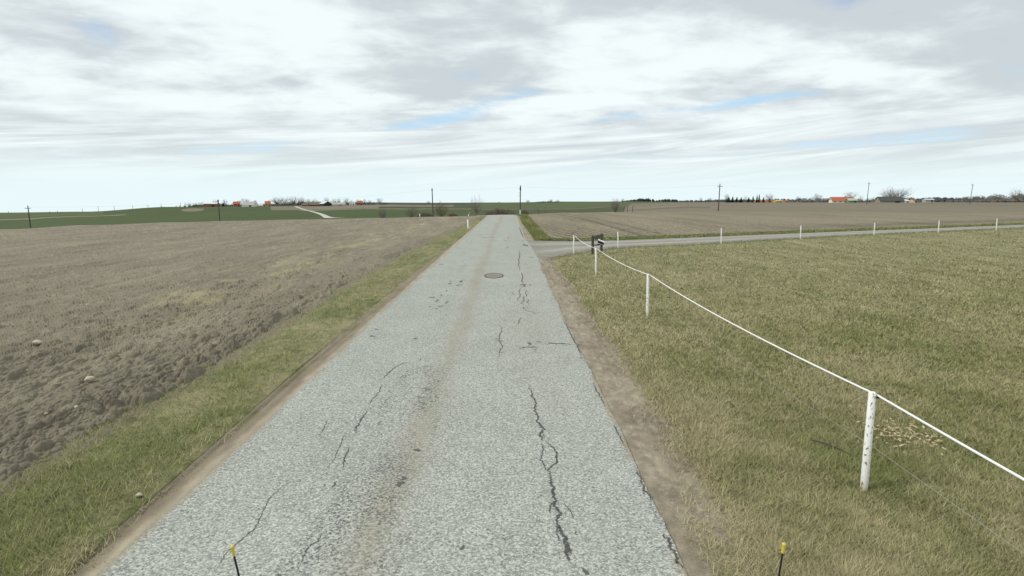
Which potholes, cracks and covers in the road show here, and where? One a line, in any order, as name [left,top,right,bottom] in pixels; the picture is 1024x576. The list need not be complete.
crack [212,489,279,574]
crack [316,363,403,487]
crack [497,227,534,355]
